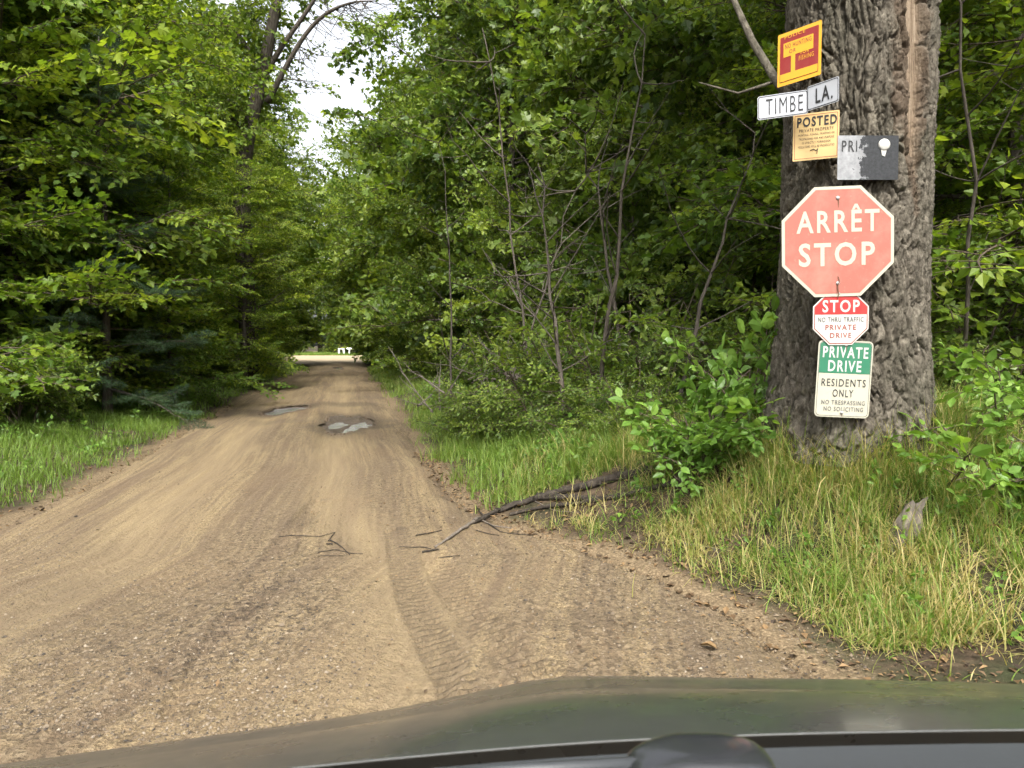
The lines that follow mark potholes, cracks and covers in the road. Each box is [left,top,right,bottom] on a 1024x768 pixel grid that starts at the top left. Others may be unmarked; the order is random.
pothole [258,404,311,417]
pothole [315,415,377,436]
